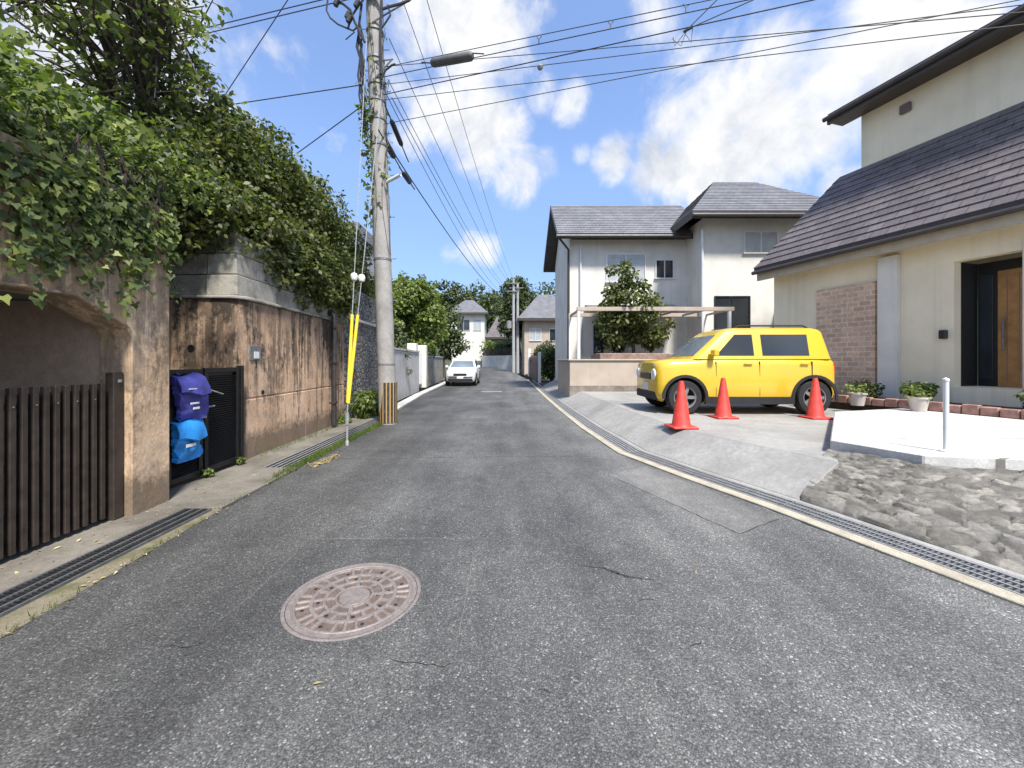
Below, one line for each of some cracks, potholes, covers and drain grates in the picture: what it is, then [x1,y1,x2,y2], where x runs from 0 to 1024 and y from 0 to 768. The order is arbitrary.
manhole cover [280,563,421,642]
crack [581,559,652,580]
drain grate [0,508,211,618]
crack [389,658,452,667]
drain grate [265,417,379,467]
drain grate [627,451,1024,596]
